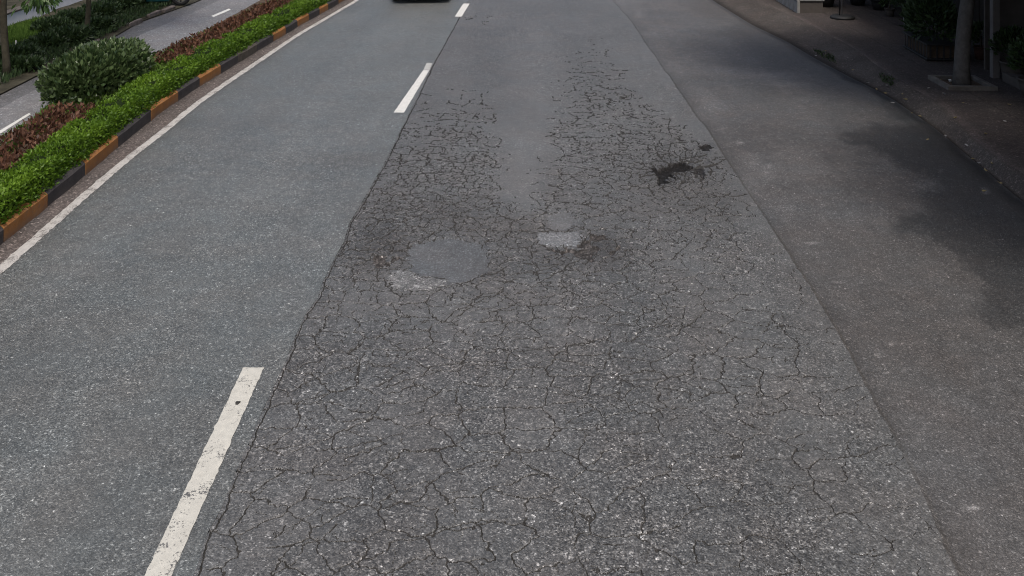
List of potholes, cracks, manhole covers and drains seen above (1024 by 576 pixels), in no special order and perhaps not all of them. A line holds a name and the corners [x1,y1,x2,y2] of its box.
pothole [650,162,693,186]
crack [198,15,942,576]
